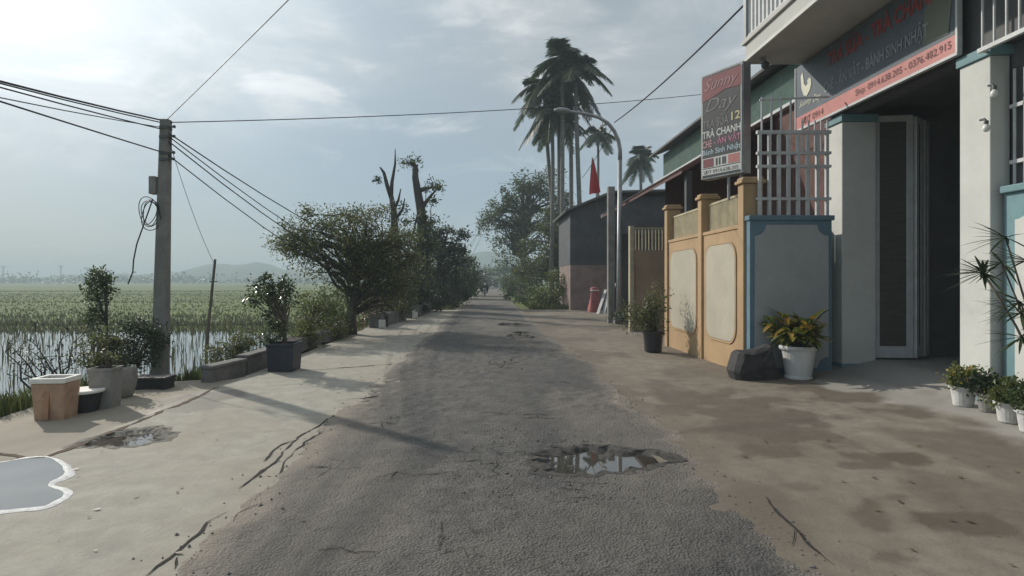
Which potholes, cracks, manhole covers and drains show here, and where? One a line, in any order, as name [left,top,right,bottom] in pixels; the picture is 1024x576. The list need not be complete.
pothole [521,443,687,477]
crack [766,497,830,562]
pothole [62,425,180,449]
crack [146,416,358,576]
